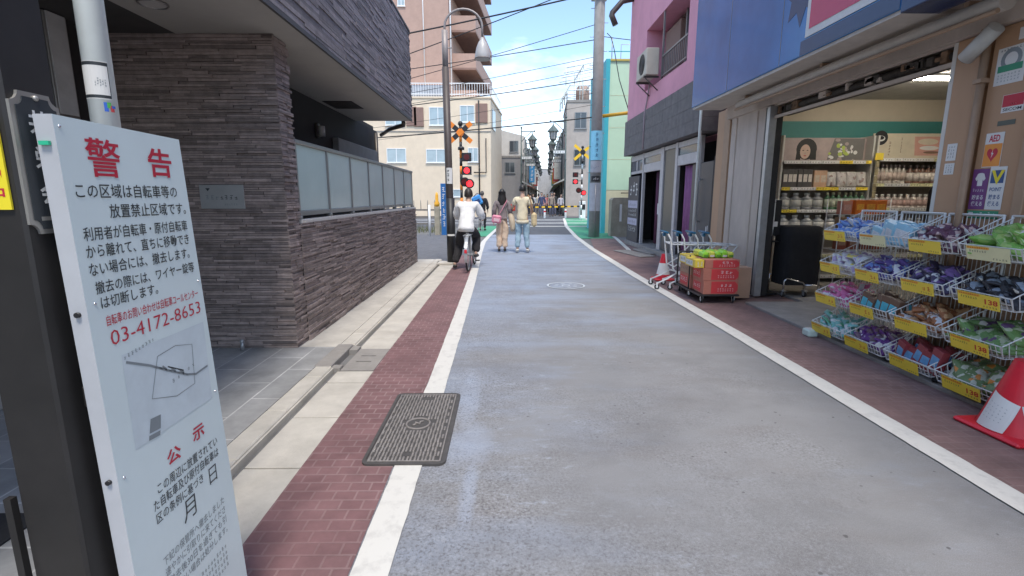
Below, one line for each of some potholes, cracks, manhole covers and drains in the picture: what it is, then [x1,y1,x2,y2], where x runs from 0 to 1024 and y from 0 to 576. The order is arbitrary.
manhole cover [362,393,460,467]
